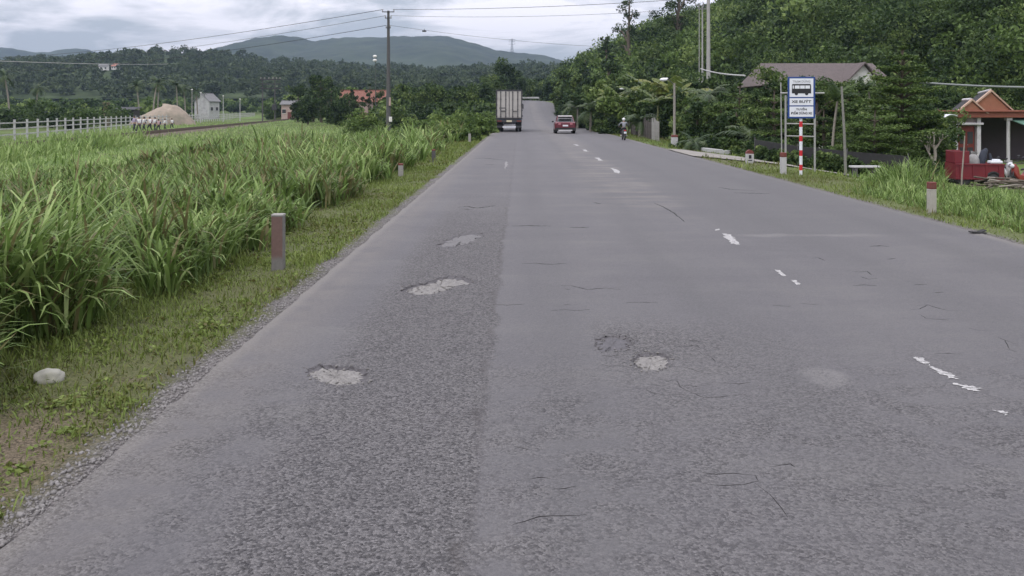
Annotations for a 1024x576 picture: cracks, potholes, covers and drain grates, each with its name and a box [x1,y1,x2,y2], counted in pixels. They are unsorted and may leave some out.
pothole [436,233,484,249]
crack [513,514,586,525]
pothole [303,363,375,387]
pothole [400,274,480,297]
pothole [629,350,677,372]
crack [652,340,750,398]
pothole [594,333,634,352]
crack [702,463,795,516]
